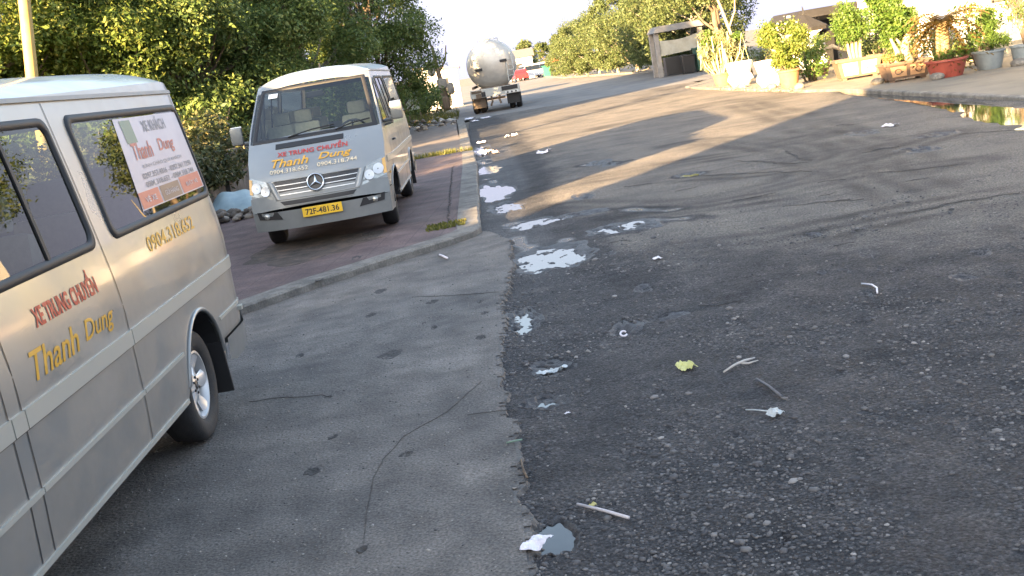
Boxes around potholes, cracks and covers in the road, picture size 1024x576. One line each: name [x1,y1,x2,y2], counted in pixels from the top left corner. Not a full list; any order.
pothole [531,359,577,377]
pothole [585,218,664,235]
pothole [534,515,583,557]
pothole [502,216,571,232]
pothole [486,201,526,214]
crack [364,381,513,534]
pothole [504,306,545,336]
pothole [479,183,518,203]
pothole [512,240,600,275]
